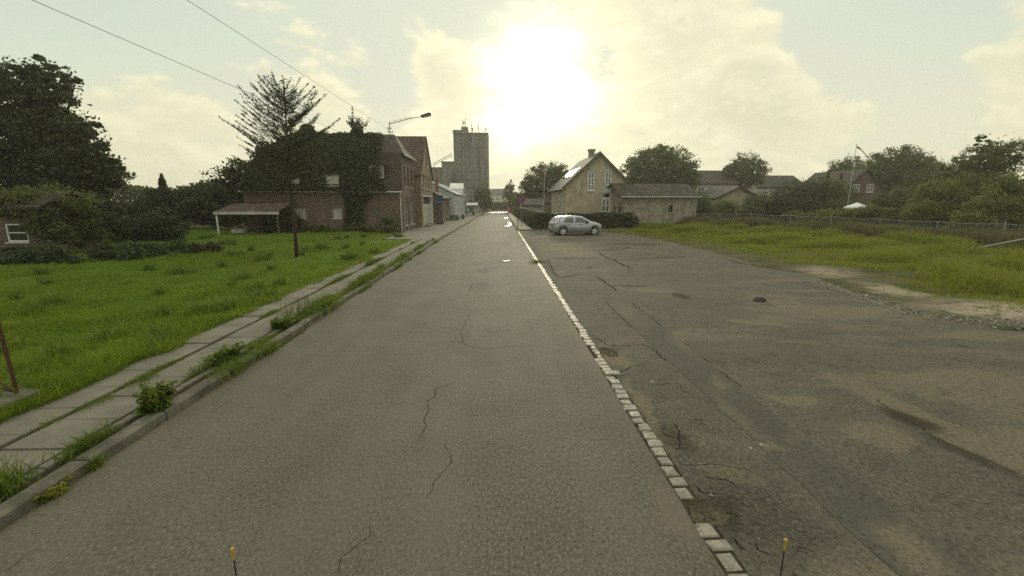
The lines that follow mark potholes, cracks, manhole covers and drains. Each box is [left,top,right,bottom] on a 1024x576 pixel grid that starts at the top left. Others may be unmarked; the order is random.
crack [547,243,688,310]
crack [663,423,807,566]
pothole [600,347,618,358]
crack [877,399,1017,474]
crack [594,338,667,376]
